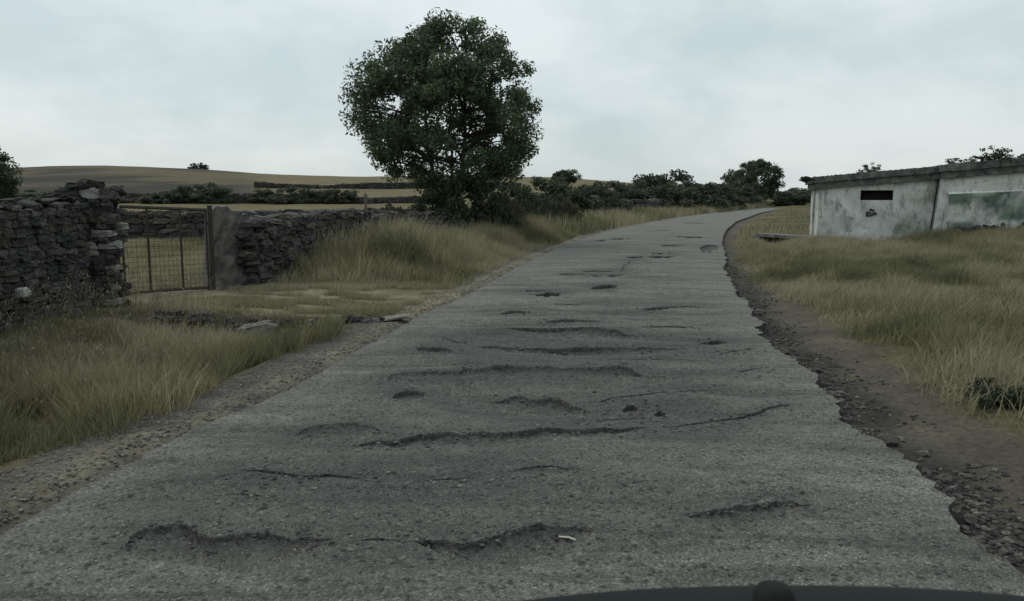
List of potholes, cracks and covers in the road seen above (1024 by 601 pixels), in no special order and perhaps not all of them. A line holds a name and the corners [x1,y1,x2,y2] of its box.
pothole [490,395,593,418]
crack [223,469,361,496]
pothole [294,422,381,443]
pothole [478,346,680,357]
crack [597,390,789,428]
pothole [350,427,649,449]
pothole [392,391,424,402]
pothole [700,245,719,254]
pothole [416,524,595,570]
pothole [126,523,338,574]
pothole [688,501,809,531]
pothole [387,365,677,397]
